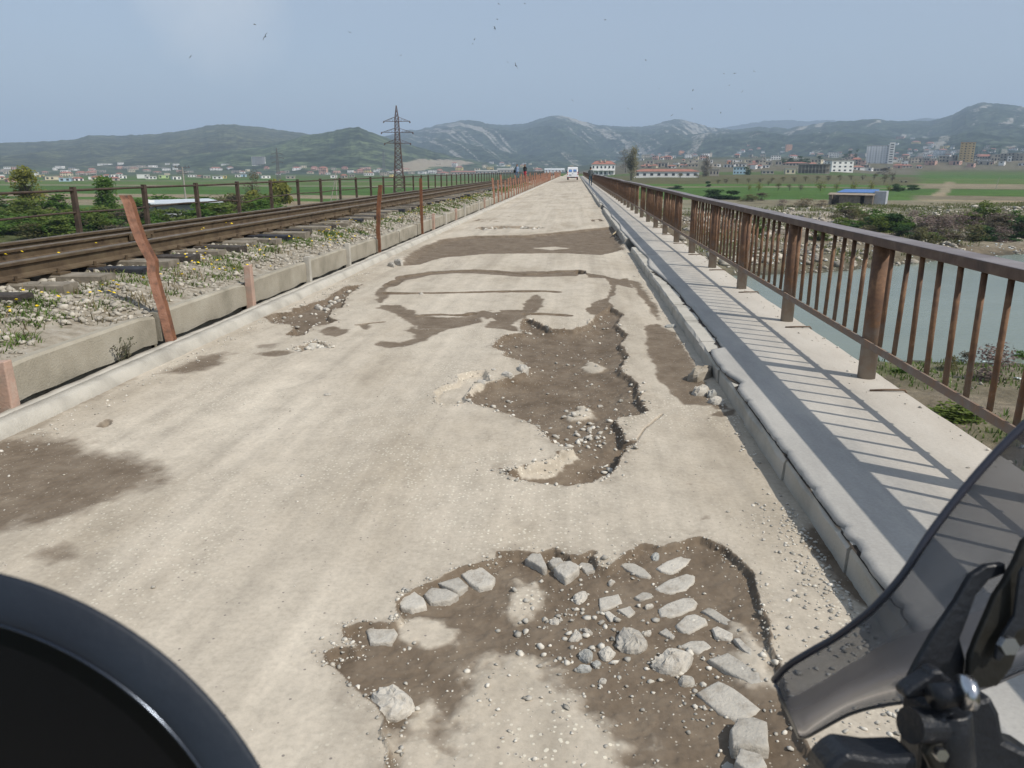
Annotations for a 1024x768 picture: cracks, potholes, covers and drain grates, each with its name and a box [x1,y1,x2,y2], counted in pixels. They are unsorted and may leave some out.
pothole [263,284,363,336]
pothole [322,536,812,768]
pothole [432,370,490,405]
pothole [466,305,649,487]
